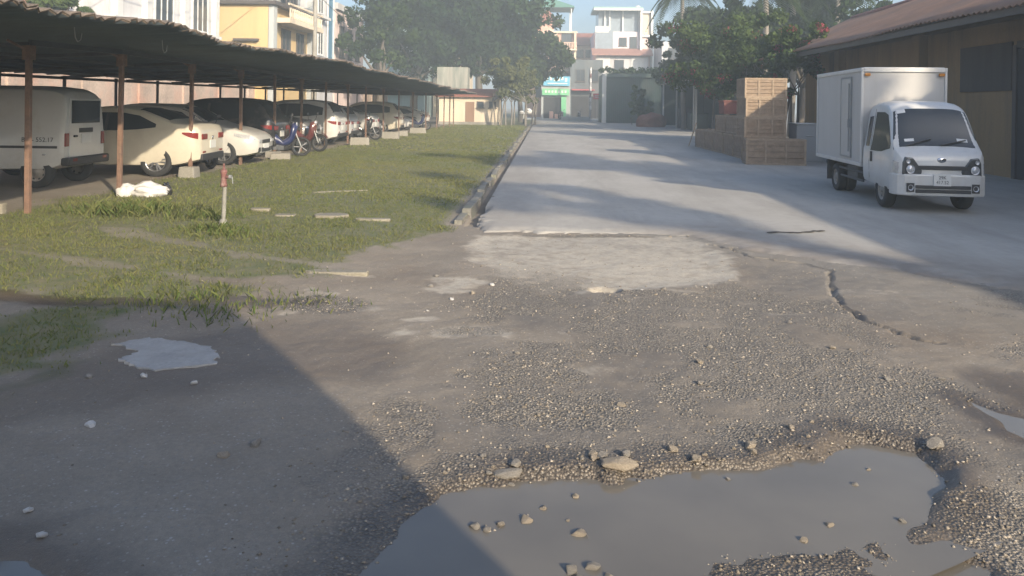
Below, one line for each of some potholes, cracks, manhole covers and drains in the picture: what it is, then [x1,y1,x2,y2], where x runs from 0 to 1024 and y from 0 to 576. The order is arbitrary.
pothole [315,425,986,576]
pothole [941,391,1024,443]
crack [714,230,949,345]
